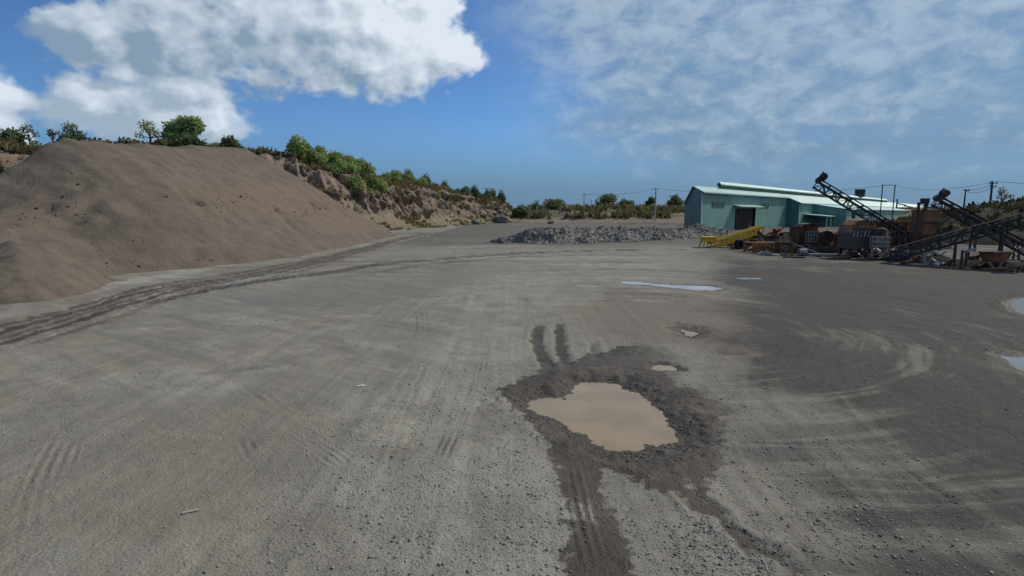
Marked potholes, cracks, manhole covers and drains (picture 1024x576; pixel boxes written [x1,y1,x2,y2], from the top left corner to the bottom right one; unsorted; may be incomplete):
pothole [661,322,722,339]
pothole [481,367,734,471]
pothole [642,360,685,372]
